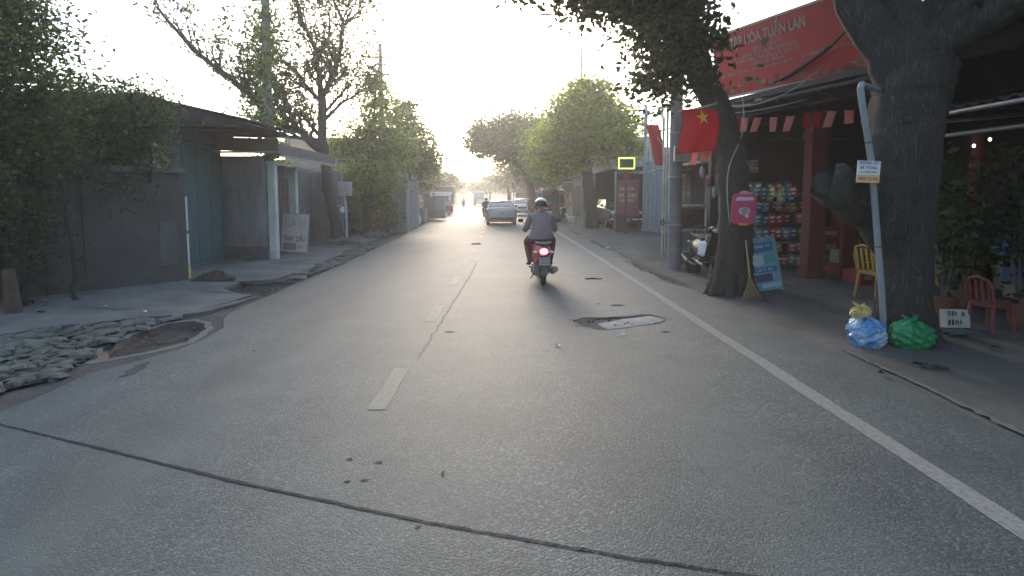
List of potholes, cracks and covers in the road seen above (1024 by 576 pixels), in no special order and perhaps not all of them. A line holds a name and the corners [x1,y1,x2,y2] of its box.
pothole [85,319,214,364]
